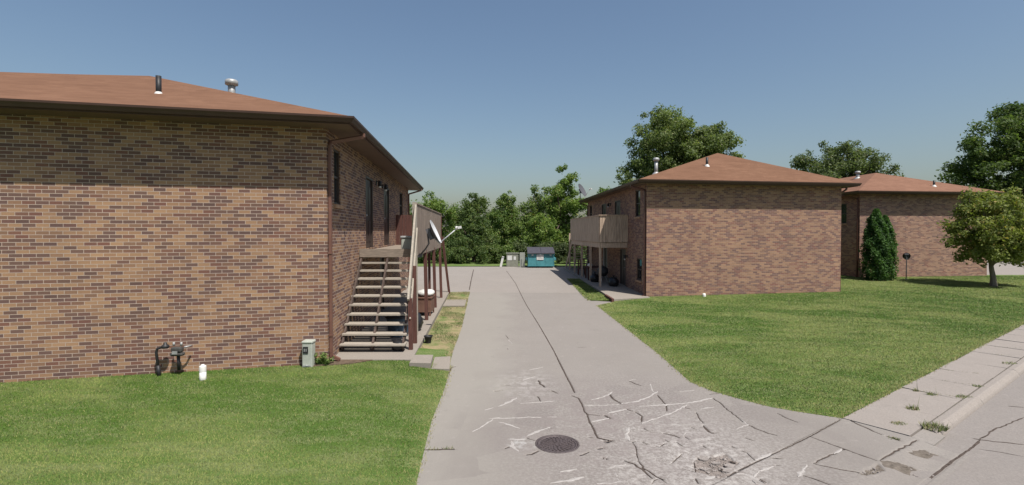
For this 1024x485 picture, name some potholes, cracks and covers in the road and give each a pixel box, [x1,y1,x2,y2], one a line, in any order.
manhole cover [535,435,579,453]
crack [551,379,796,484]
crack [797,449,860,477]
crack [472,367,556,455]
pothole [692,455,739,478]
crack [972,417,1024,455]
